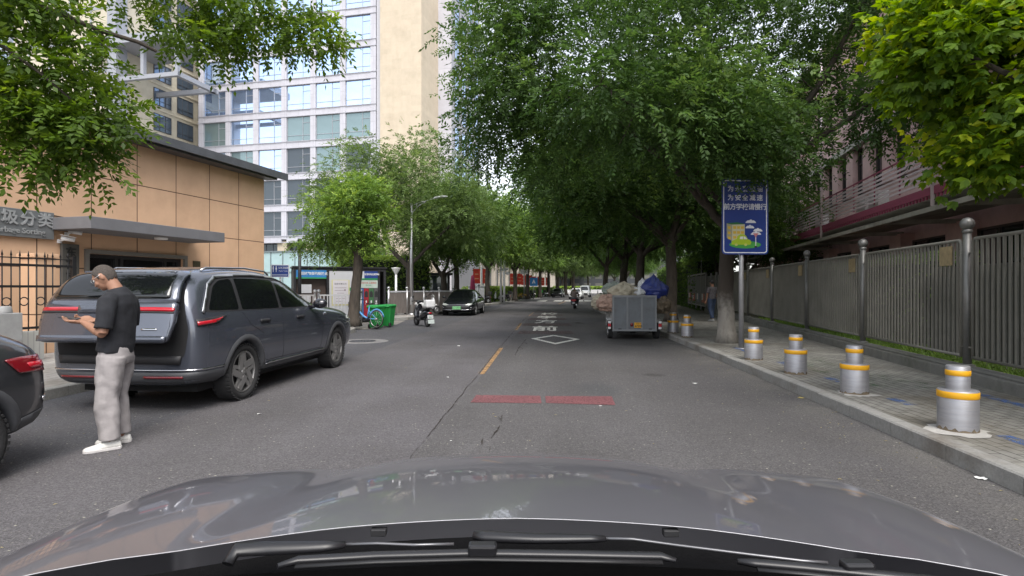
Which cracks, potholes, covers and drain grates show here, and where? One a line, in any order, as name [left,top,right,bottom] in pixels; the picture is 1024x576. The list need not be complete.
crack [410,320,527,458]
